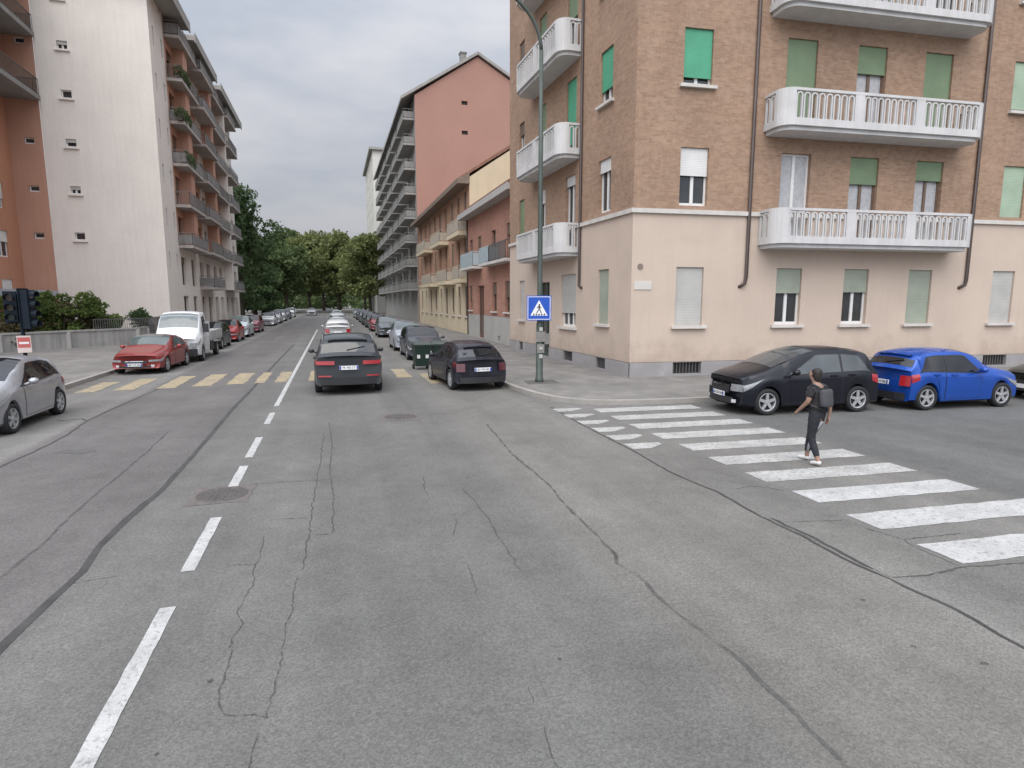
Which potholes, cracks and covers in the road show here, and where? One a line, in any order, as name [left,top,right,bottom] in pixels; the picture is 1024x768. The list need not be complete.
manhole cover [182,483,258,507]
crack [463,490,520,569]
manhole cover [380,412,421,421]
crack [218,537,298,768]
